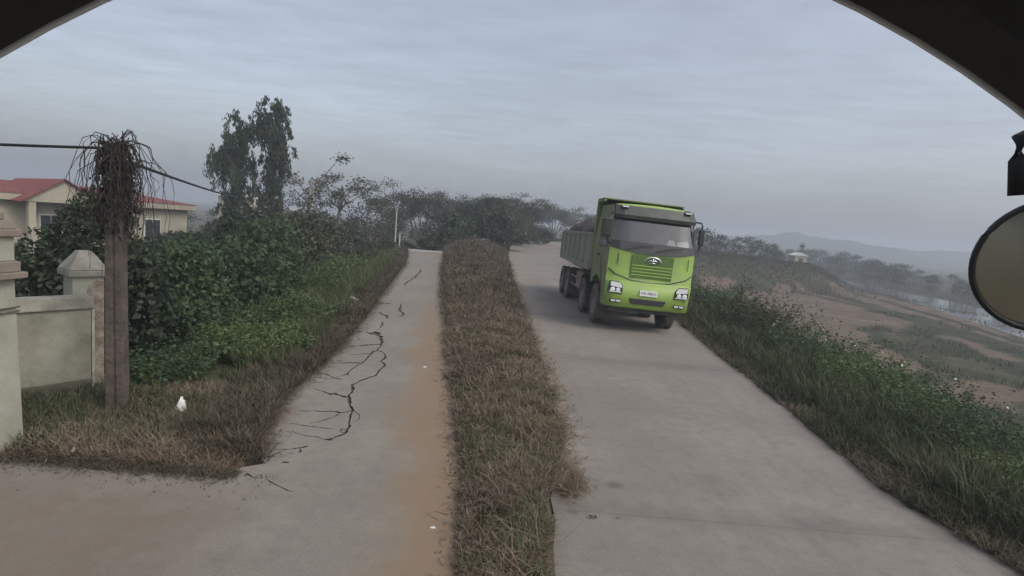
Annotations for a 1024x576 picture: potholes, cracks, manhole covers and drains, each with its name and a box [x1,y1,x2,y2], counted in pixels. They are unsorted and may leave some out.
crack [290,303,404,441]
